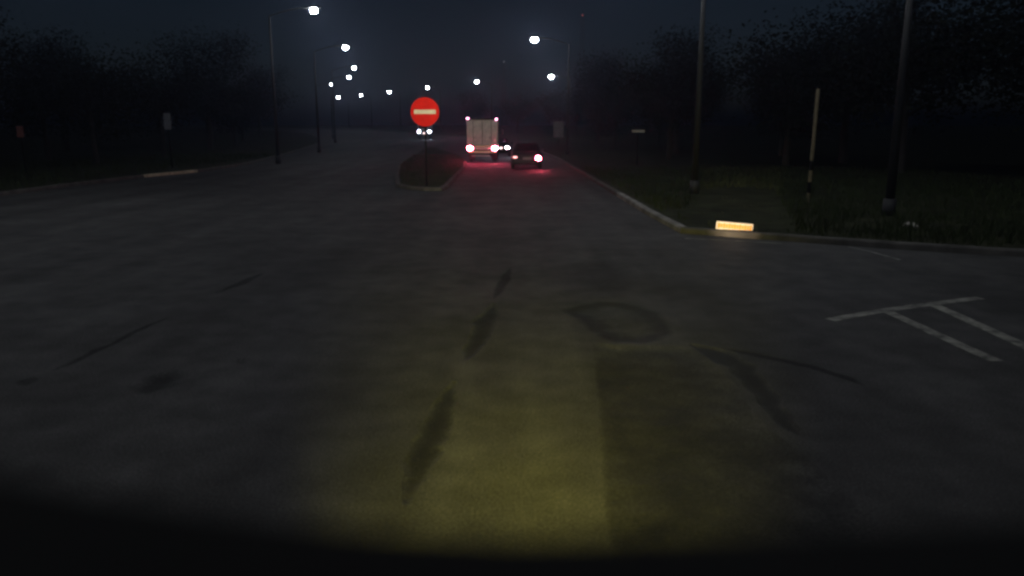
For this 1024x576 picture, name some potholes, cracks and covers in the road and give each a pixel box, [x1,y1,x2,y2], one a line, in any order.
crack [213,273,264,294]
crack [460,268,512,360]
crack [689,343,867,440]
crack [401,381,459,508]
crack [51,315,175,371]
